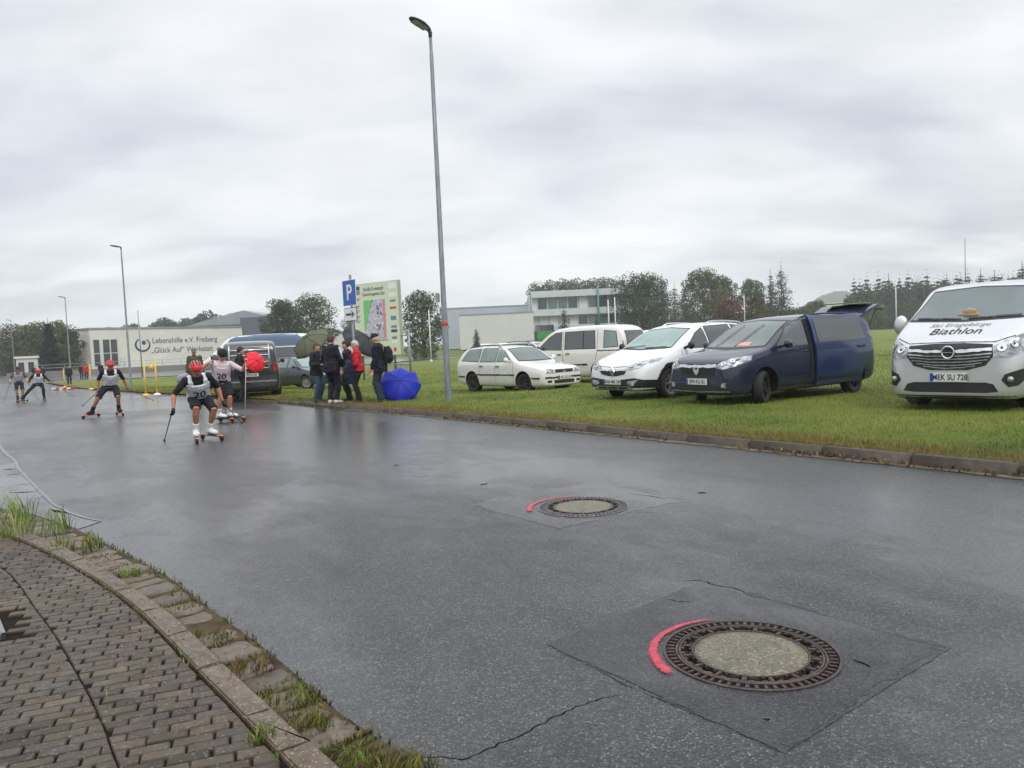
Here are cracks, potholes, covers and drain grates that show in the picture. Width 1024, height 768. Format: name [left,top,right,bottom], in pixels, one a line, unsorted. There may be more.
manhole cover [538,497,628,517]
manhole cover [663,620,843,692]
crack [424,695,616,760]
